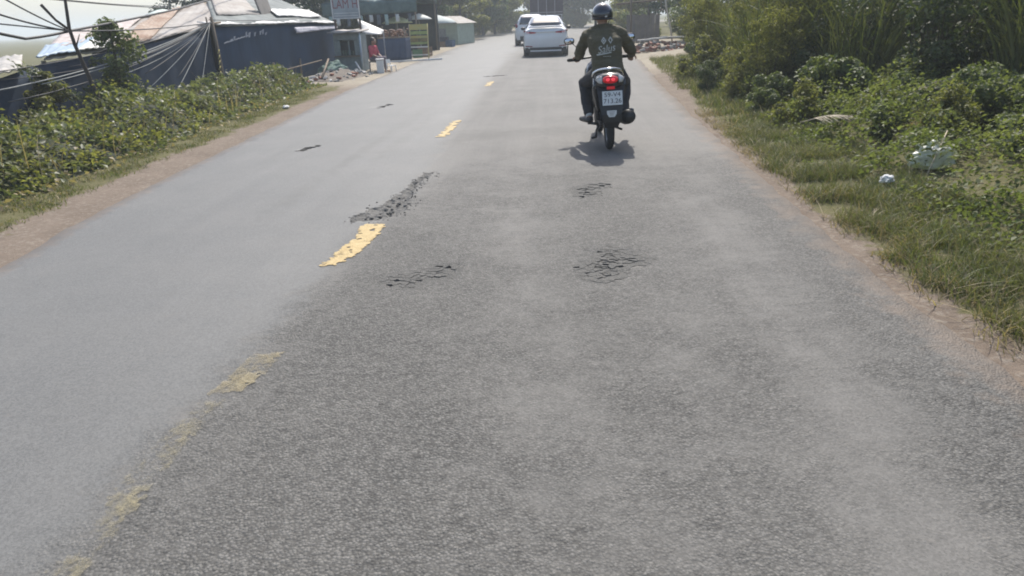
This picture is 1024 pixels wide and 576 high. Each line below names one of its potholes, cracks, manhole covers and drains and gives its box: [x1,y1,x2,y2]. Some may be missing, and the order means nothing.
pothole [349,172,440,224]
crack [572,247,657,283]
crack [379,261,463,292]
